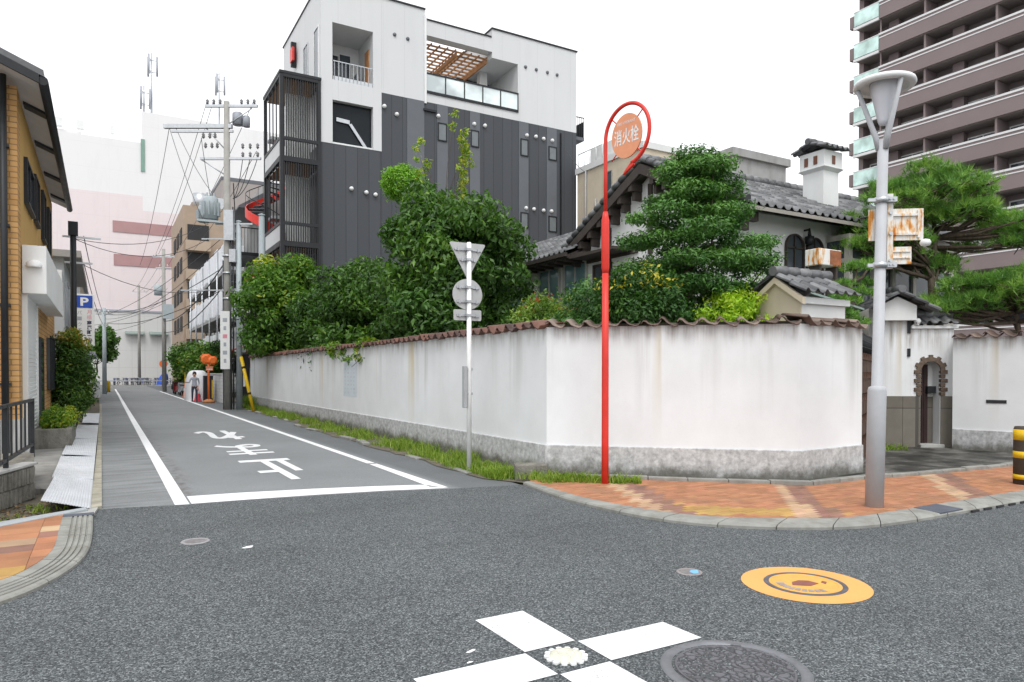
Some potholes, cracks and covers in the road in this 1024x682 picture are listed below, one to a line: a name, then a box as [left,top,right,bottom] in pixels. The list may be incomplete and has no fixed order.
manhole cover [660,640,814,682]
utility cover [676,568,702,576]
